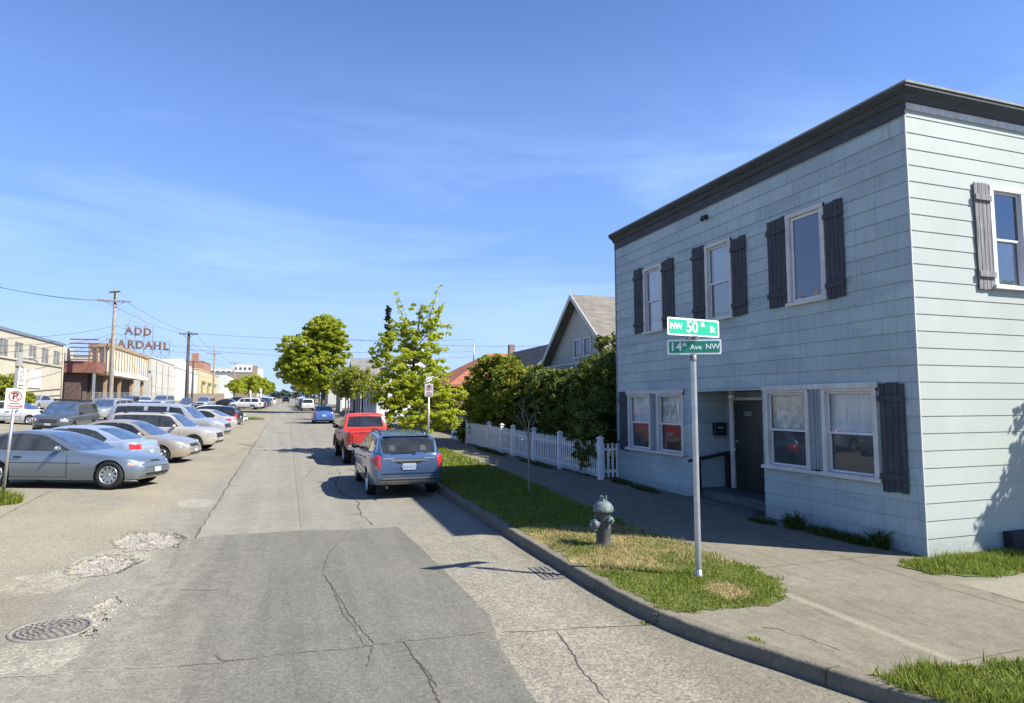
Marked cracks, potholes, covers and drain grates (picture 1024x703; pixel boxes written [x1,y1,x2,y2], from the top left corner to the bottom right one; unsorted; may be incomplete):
pothole [97,529,194,555]
crack [330,471,373,525]
manhole cover [6,617,94,643]
pothole [48,552,151,582]
crack [176,424,279,538]
crack [506,624,653,703]
crack [180,530,484,703]
pothole [61,591,138,645]
drain grate [528,565,566,580]
